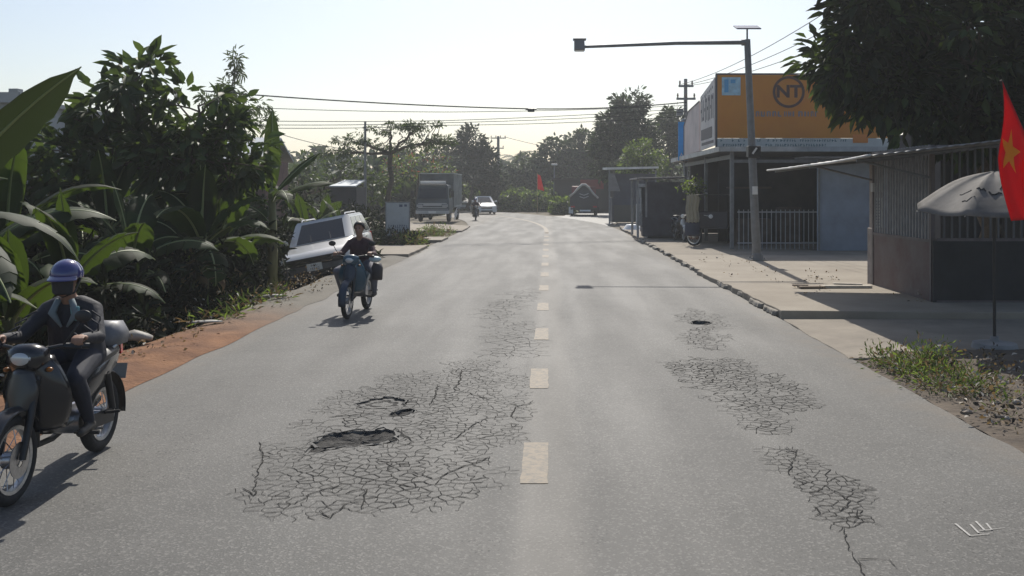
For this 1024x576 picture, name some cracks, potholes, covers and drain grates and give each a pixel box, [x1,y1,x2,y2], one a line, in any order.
crack [472,289,550,359]
crack [661,308,897,576]
pothole [388,408,414,417]
pothole [299,427,403,455]
crack [226,358,533,522]
